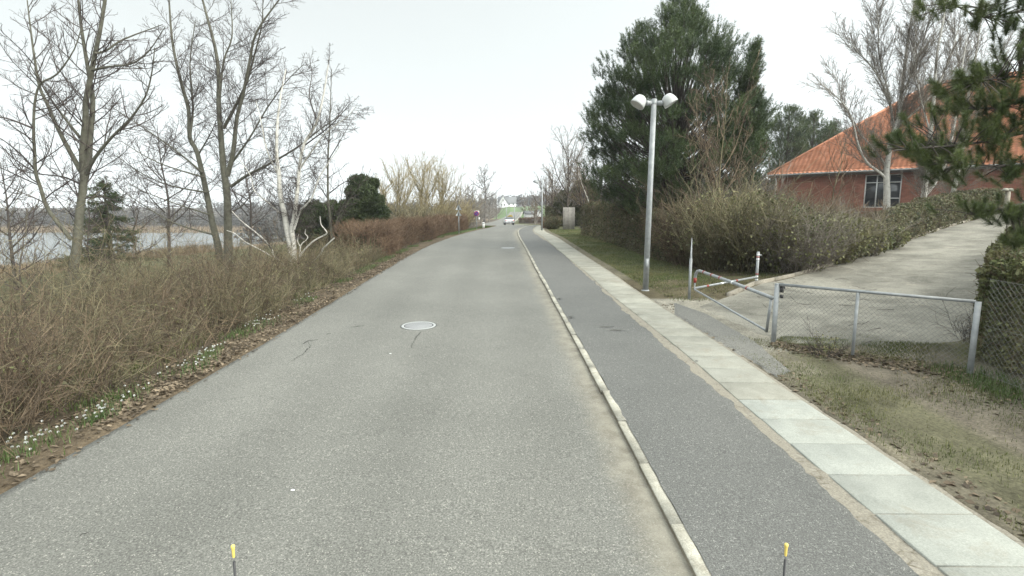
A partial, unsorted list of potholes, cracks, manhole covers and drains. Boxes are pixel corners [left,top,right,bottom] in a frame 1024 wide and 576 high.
manhole cover [400,321,437,330]
